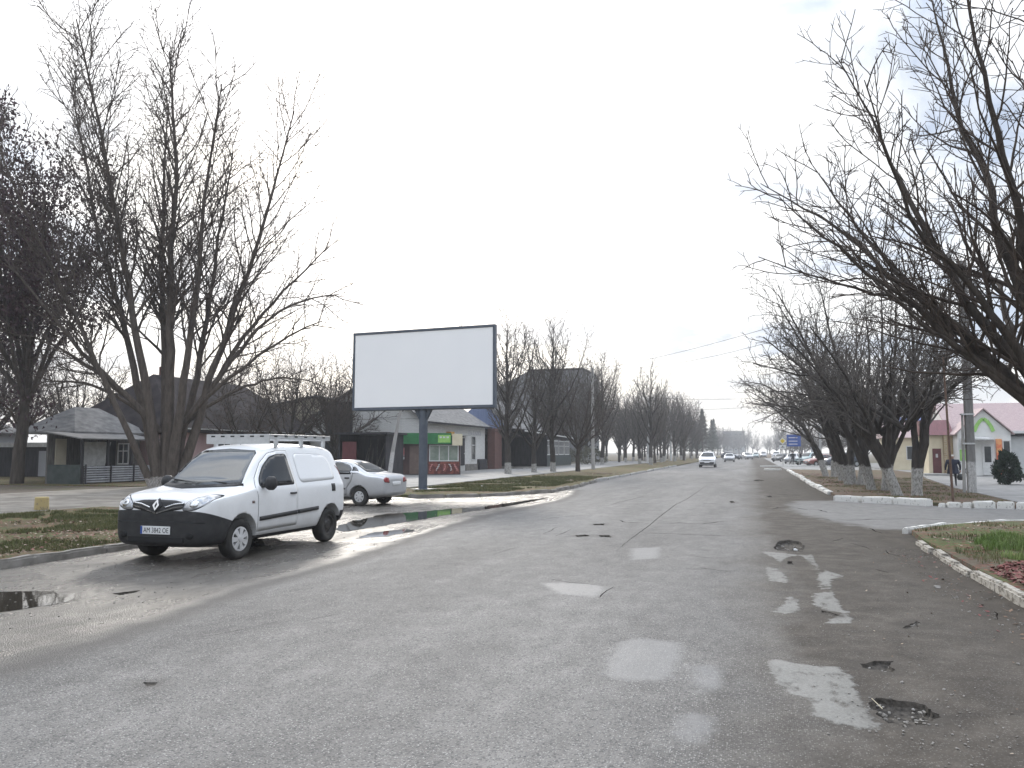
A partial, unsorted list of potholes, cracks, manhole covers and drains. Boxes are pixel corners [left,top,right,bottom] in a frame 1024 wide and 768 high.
pothole [774,540,805,552]
pothole [861,661,895,672]
pothole [868,698,941,727]
